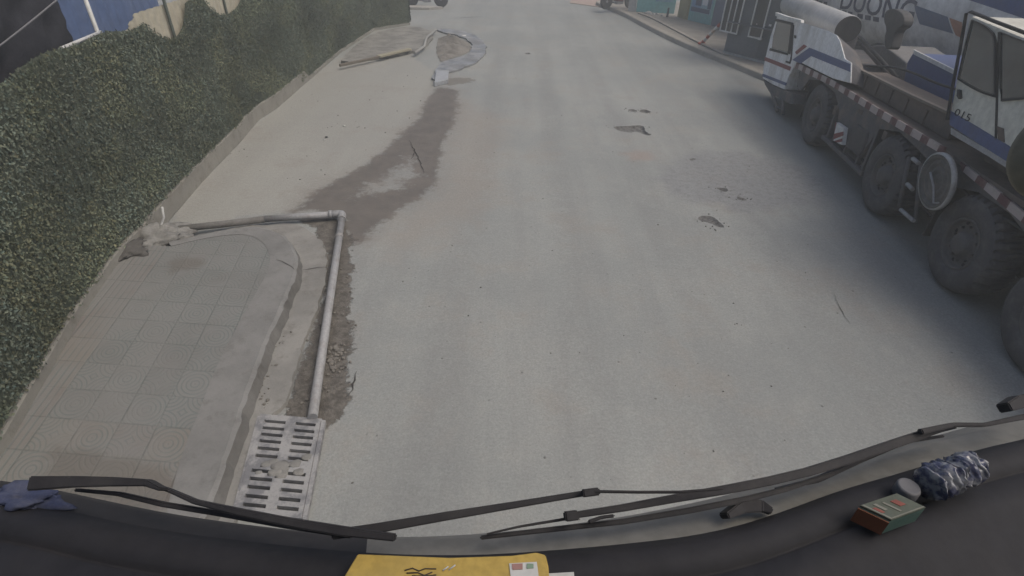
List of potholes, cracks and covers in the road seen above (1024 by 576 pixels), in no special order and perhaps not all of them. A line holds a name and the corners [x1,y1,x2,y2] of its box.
drain grate [234,414,326,520]
pothole [698,216,724,227]
pothole [614,125,651,135]
